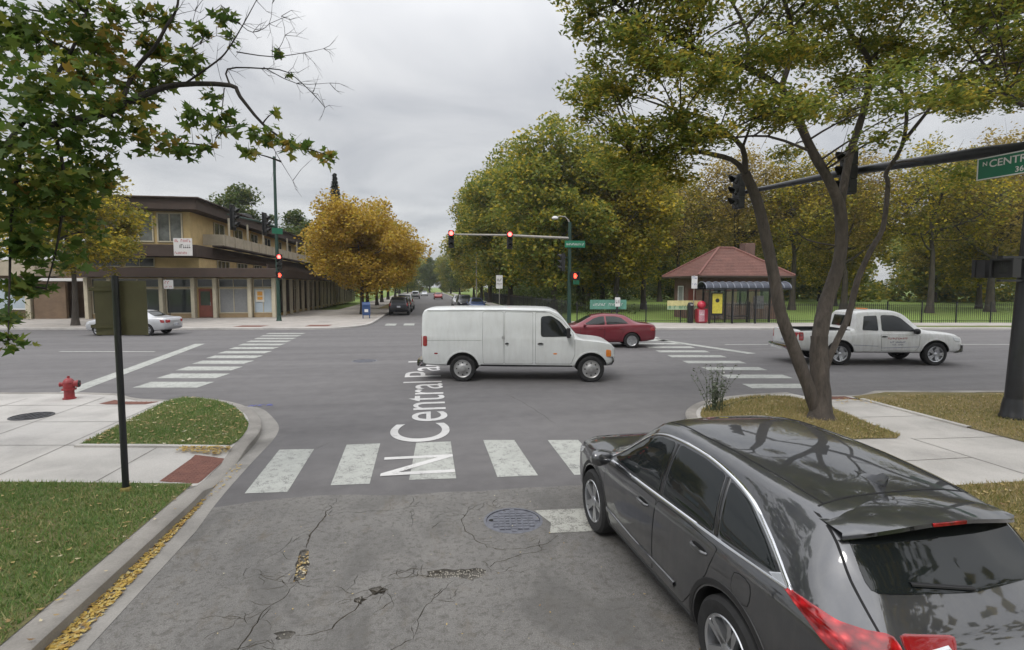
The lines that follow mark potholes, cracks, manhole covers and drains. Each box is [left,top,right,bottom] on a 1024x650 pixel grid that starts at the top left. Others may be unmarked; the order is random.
manhole cover [484,508,543,534]
manhole cover [7,412,55,421]
pothole [427,568,486,581]
pothole [293,549,310,582]
pothole [273,630,296,640]
crack [201,498,558,650]
